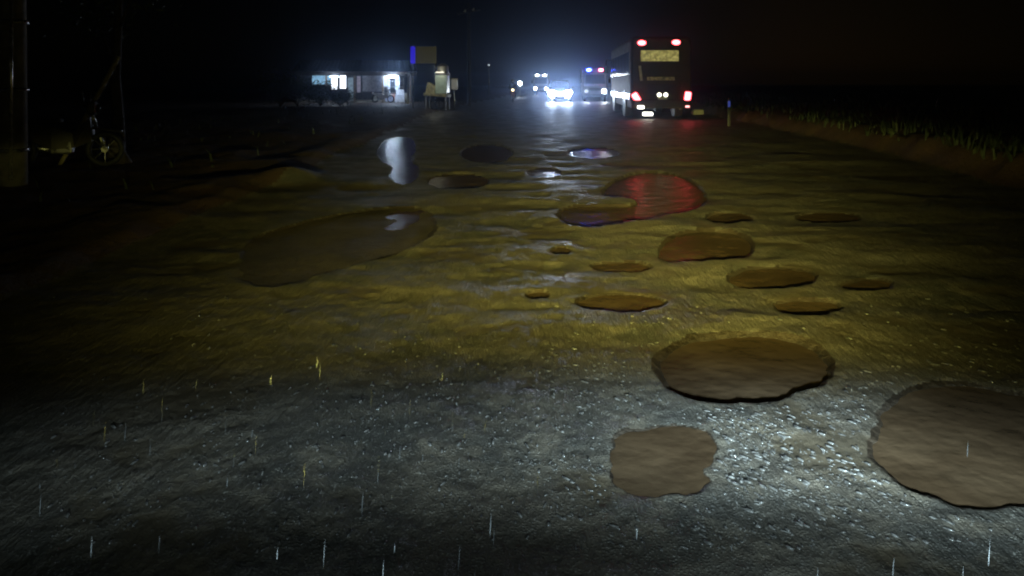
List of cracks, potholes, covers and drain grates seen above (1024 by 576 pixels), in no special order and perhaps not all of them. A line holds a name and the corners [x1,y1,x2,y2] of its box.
pothole [651,330,835,404]
pothole [376,136,421,185]
pothole [726,265,819,289]
pothole [838,278,894,291]
pothole [525,289,550,299]
pothole [773,296,845,315]
pothole [610,423,718,498]
pothole [238,206,438,287]
pothole [459,144,514,163]
pothole [554,170,709,227]
pothole [866,380,1024,510]
pothole [525,168,562,177]
